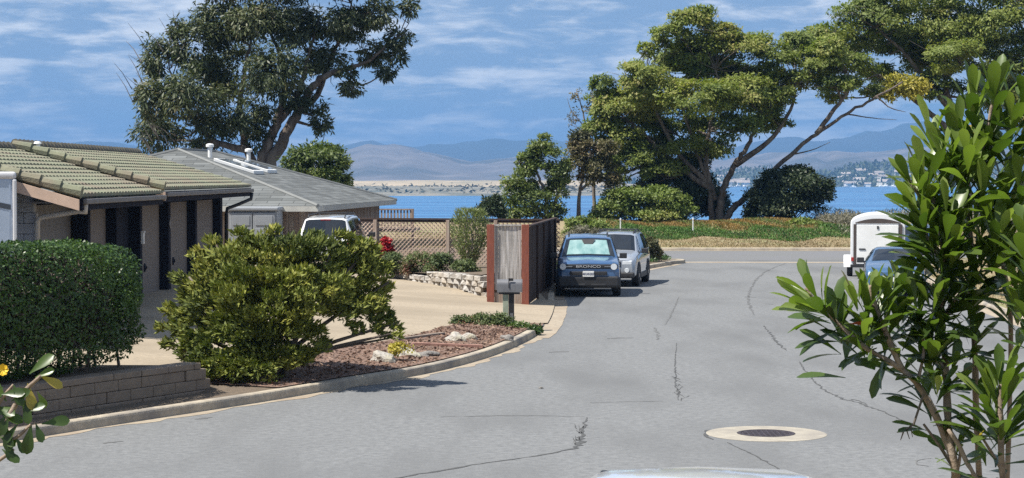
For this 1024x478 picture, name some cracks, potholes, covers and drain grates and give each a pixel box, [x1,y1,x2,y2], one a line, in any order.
crack [747,263,920,427]
manhole cover [706,426,827,442]
crack [654,298,688,400]
crack [703,429,779,469]
